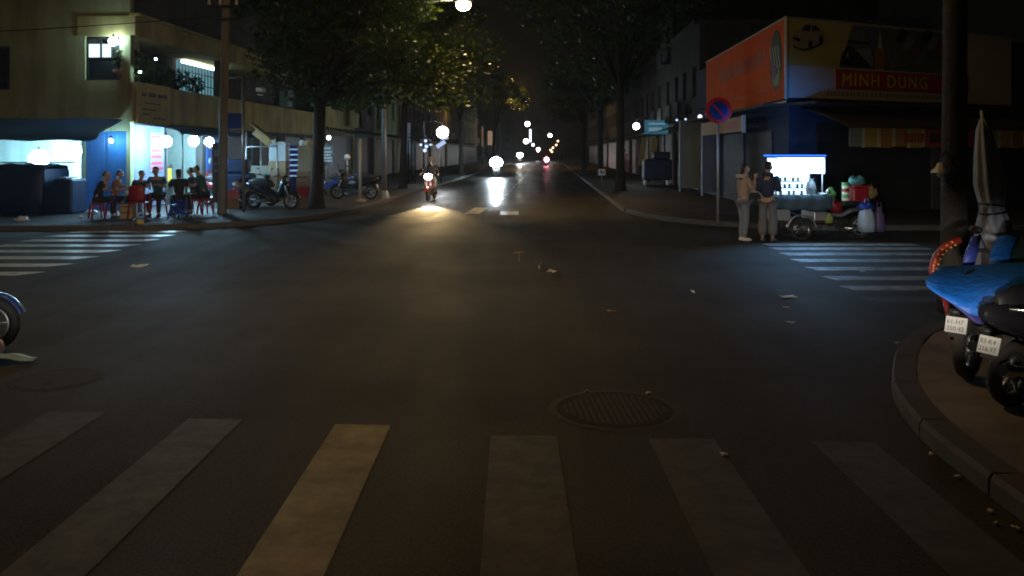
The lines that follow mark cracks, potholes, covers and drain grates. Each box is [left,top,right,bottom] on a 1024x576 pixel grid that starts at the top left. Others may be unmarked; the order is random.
manhole cover [549,391,682,431]
manhole cover [6,368,107,392]
